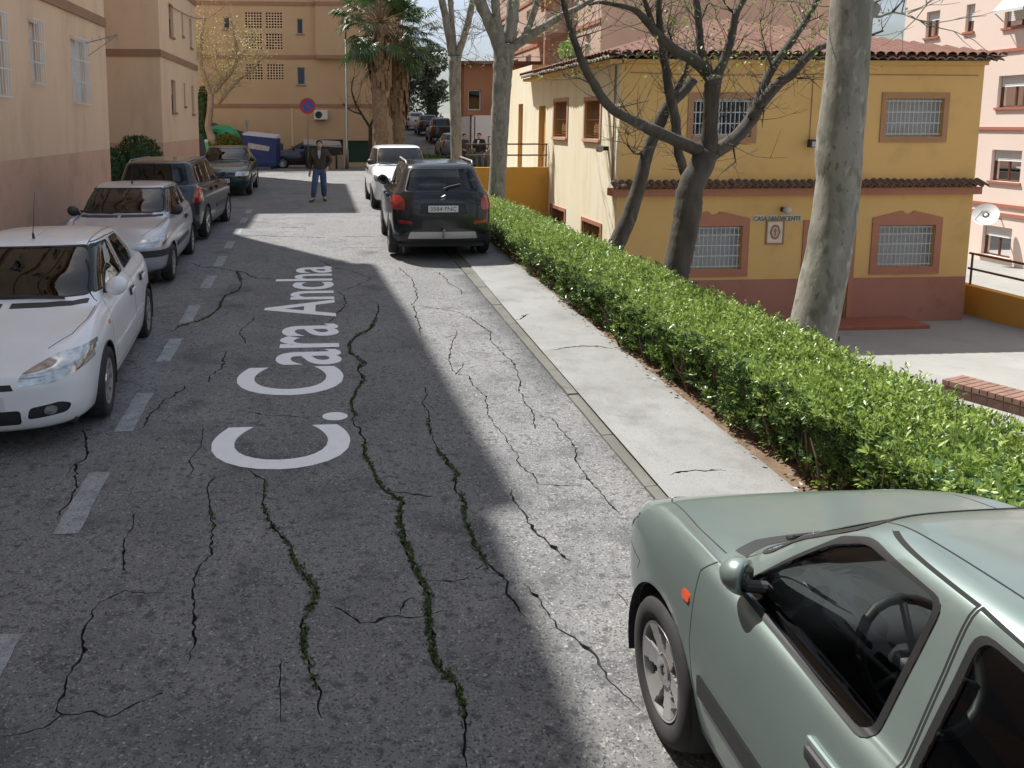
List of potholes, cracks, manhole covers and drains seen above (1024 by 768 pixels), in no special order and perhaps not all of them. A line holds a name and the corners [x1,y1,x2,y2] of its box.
crack [170,227,639,767]
crack [3,514,163,737]
crack [57,429,89,519]
